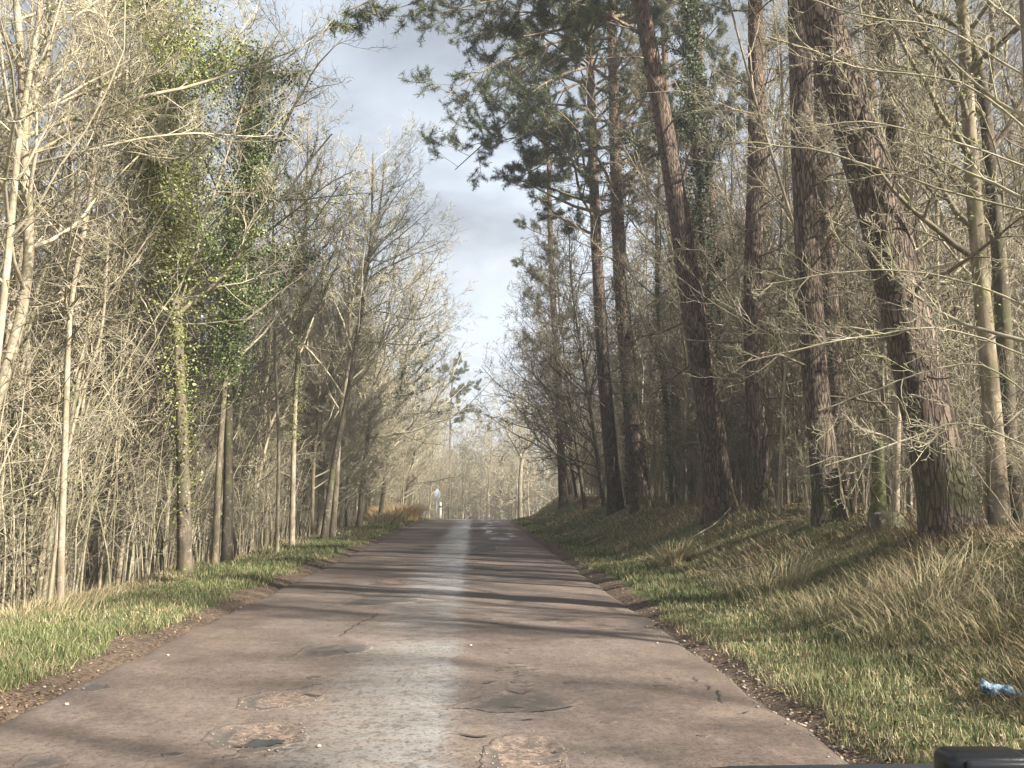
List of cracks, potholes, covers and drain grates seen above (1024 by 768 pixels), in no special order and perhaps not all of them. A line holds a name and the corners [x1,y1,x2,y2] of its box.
pothole [288,640,373,658]
pothole [446,689,583,715]
pothole [200,721,310,750]
pothole [236,691,325,711]
